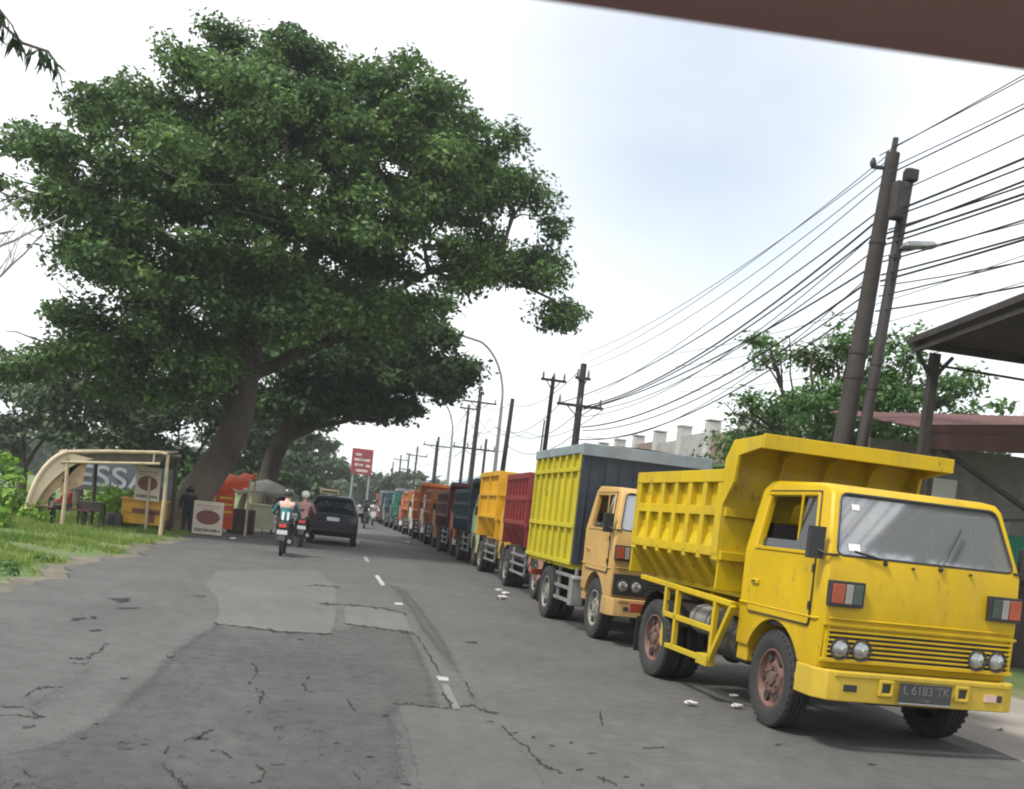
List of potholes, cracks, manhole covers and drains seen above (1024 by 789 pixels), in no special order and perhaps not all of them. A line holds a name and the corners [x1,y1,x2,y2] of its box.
crack [250,764,284,783]
crack [163,729,233,789]
crack [0,686,62,728]
crack [393,693,499,714]
crack [70,643,107,664]
